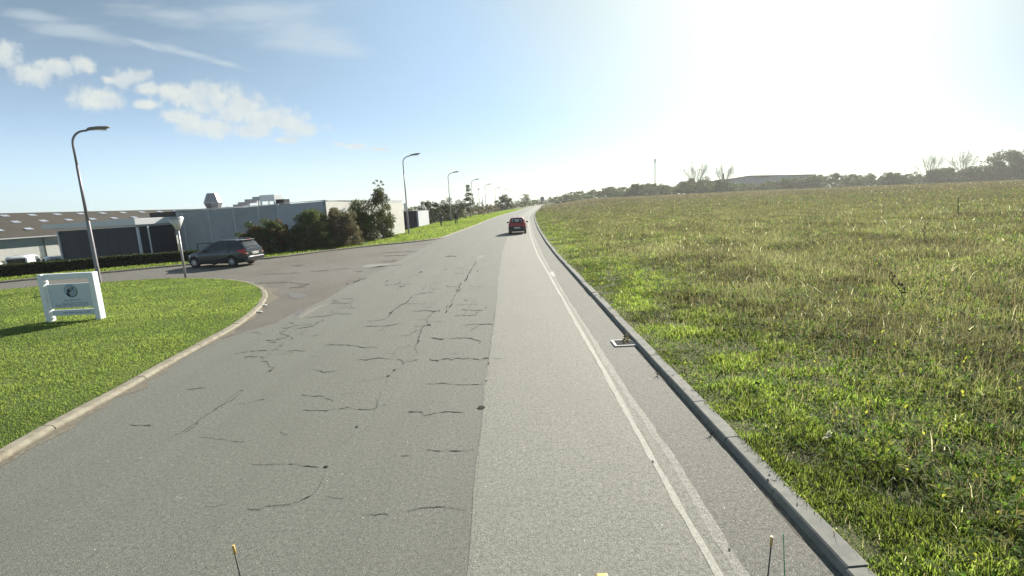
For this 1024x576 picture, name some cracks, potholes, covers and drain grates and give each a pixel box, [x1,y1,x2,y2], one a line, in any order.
crack [248,464,344,510]
crack [180,390,263,443]
drain grate [611,339,636,347]
crack [236,251,497,455]
